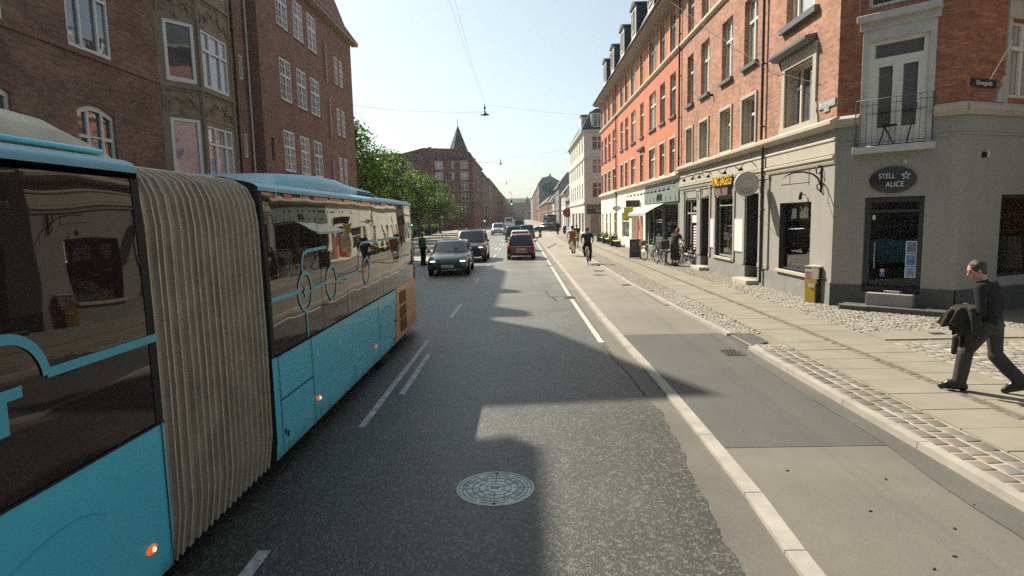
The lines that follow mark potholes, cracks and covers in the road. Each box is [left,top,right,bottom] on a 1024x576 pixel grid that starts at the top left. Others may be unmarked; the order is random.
manhole cover [456,472,534,506]
